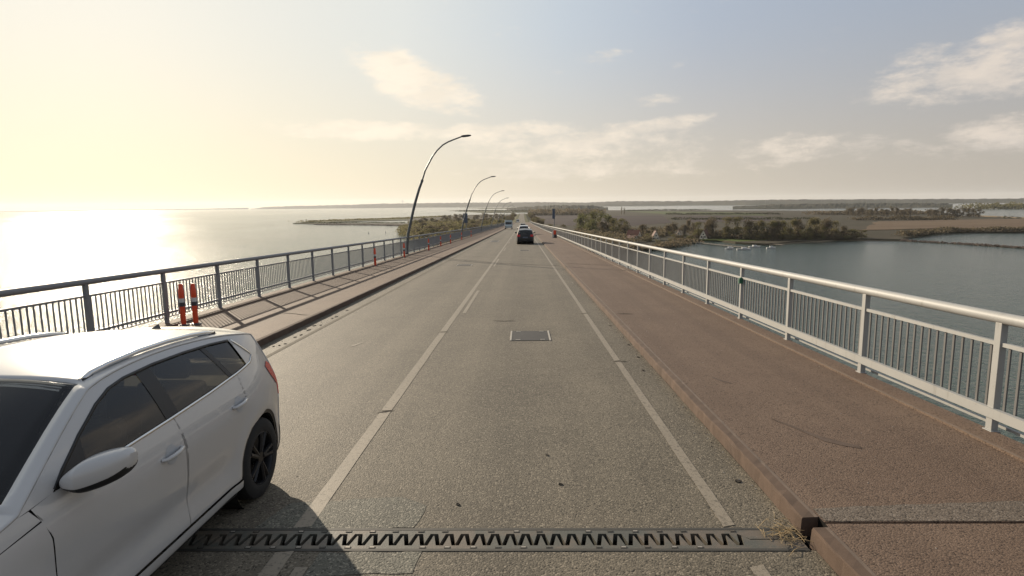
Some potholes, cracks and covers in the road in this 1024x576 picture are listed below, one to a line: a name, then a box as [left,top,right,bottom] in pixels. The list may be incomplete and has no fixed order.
manhole cover [510,331,551,341]
